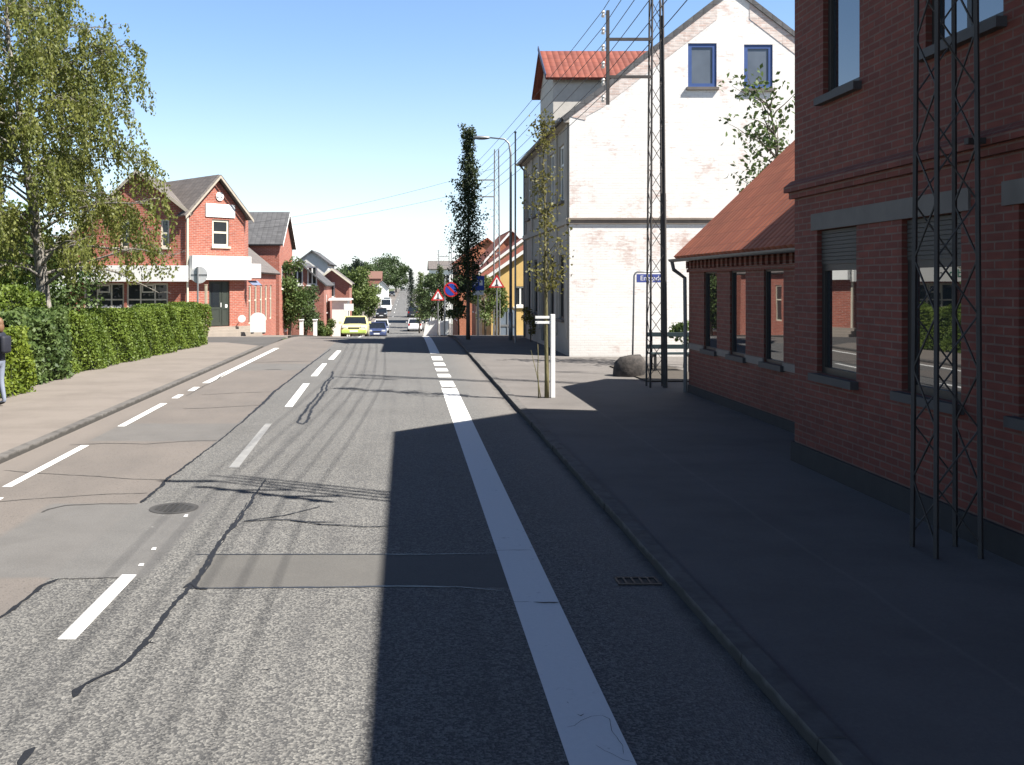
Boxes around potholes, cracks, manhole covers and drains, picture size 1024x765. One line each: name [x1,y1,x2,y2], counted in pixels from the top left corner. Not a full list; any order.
manhole cover [149,502,199,514]
drain grate [613,577,662,585]
